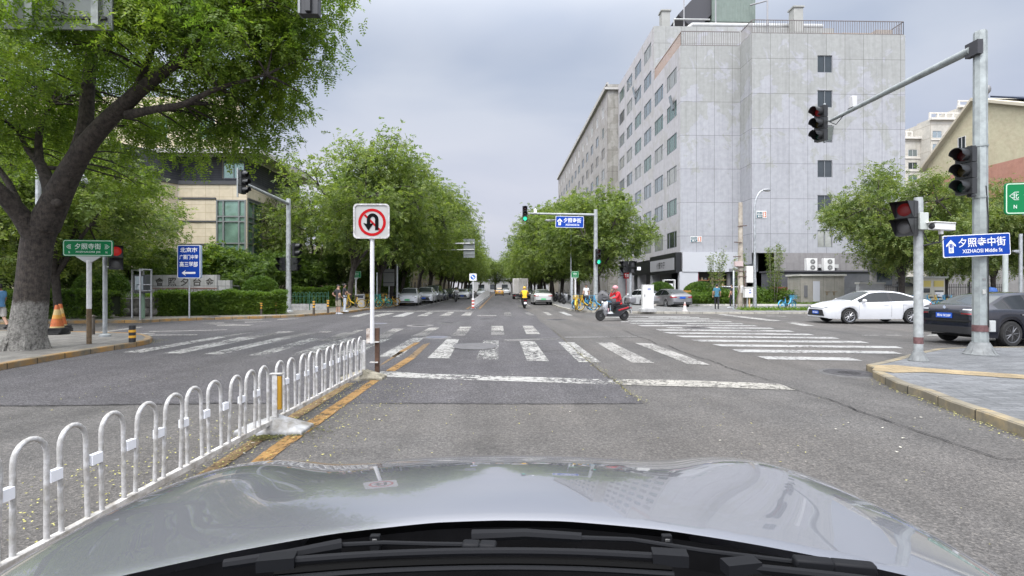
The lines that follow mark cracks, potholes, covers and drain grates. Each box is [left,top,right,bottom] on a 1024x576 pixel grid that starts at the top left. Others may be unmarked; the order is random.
crack [629,332,1018,462]
